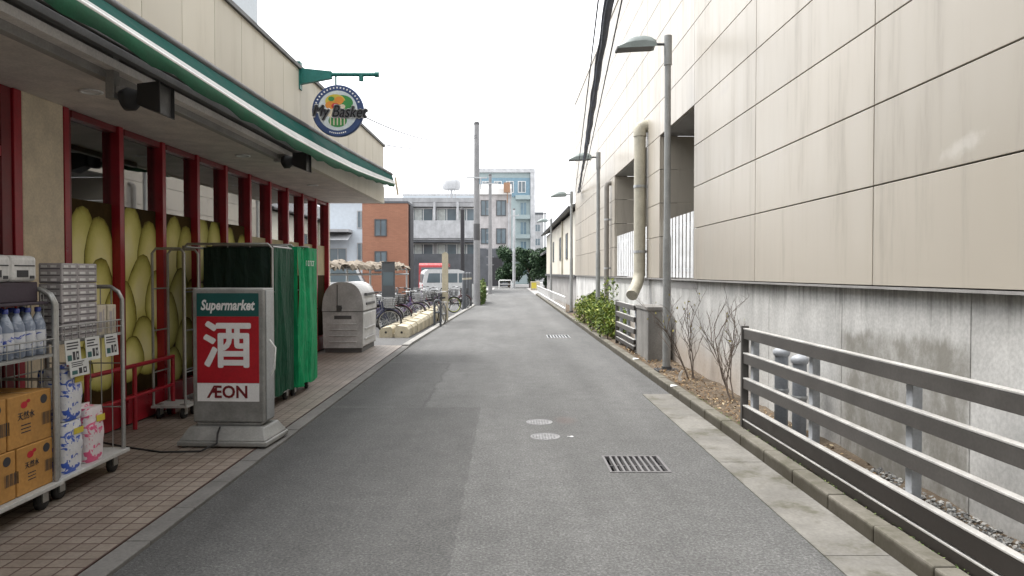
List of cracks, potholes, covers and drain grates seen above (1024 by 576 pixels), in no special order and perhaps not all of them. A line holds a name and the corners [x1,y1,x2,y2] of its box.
drain grate [602,455,672,473]
